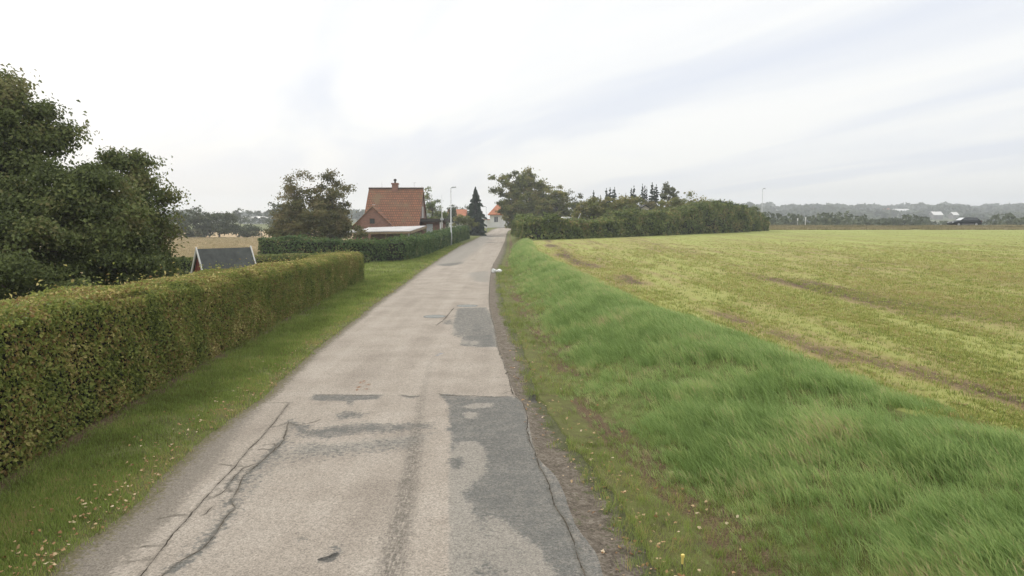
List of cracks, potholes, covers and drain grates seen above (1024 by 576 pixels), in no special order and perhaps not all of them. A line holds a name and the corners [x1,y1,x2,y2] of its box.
crack [132,402,318,576]
crack [440,263,586,576]
pothole [317,552,340,562]
